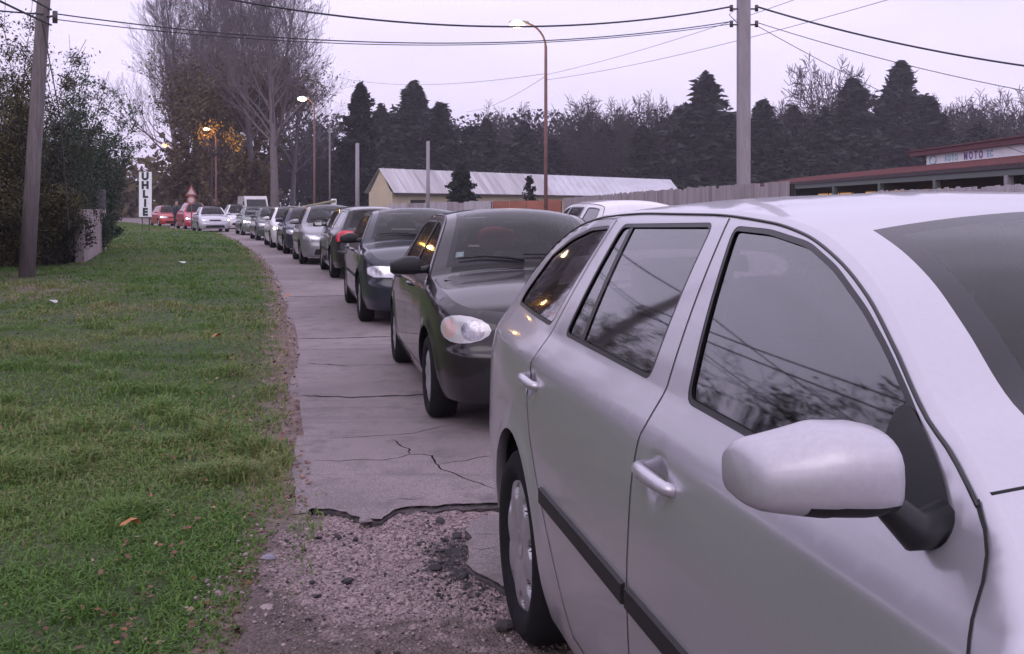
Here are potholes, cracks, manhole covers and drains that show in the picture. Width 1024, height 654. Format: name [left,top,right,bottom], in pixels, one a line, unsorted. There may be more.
pothole [232,503,574,654]
crack [315,426,494,489]
